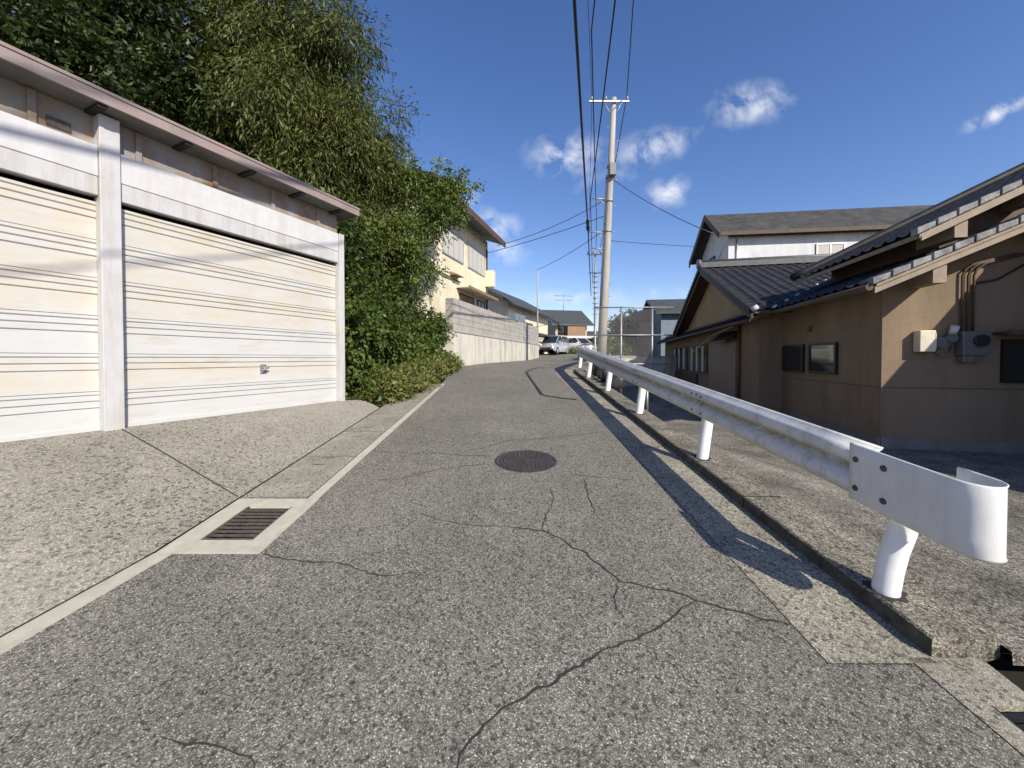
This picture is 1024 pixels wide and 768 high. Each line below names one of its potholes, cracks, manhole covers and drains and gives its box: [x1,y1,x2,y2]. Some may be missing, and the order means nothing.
crack [161,737,255,766]
crack [419,492,793,768]
manhole cover [495,450,557,473]
crack [260,552,425,576]
crack [573,474,628,518]
